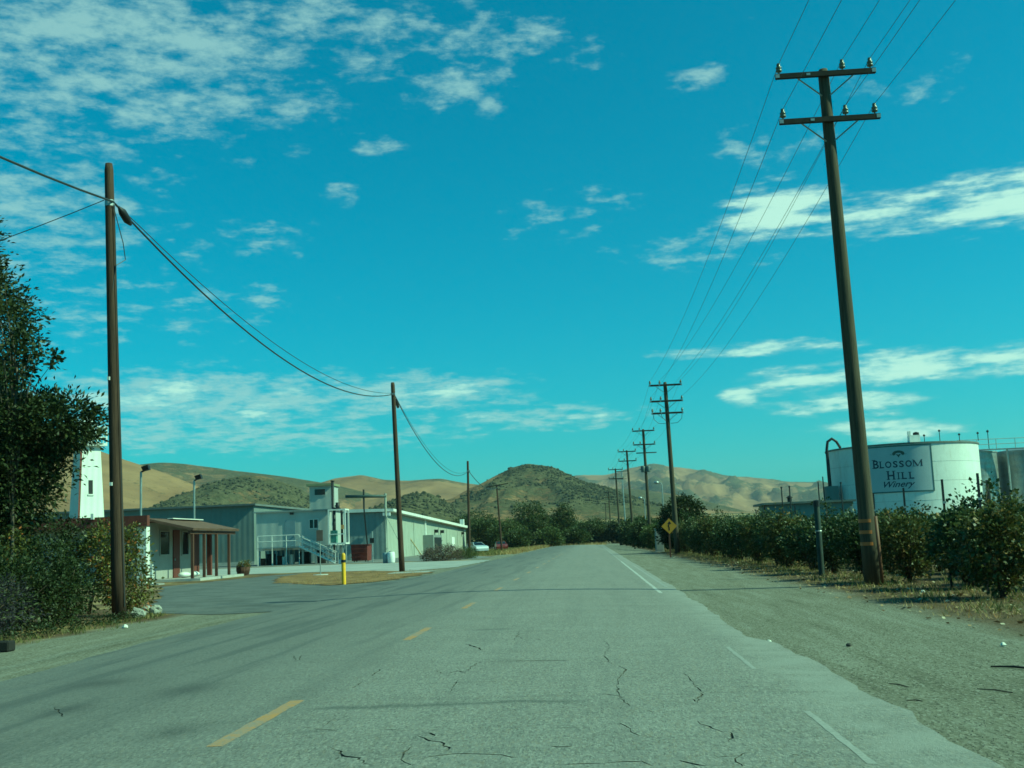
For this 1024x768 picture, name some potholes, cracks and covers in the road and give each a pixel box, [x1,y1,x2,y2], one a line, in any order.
crack [603,643,631,706]
crack [682,724,744,766]
crack [400,733,510,765]
